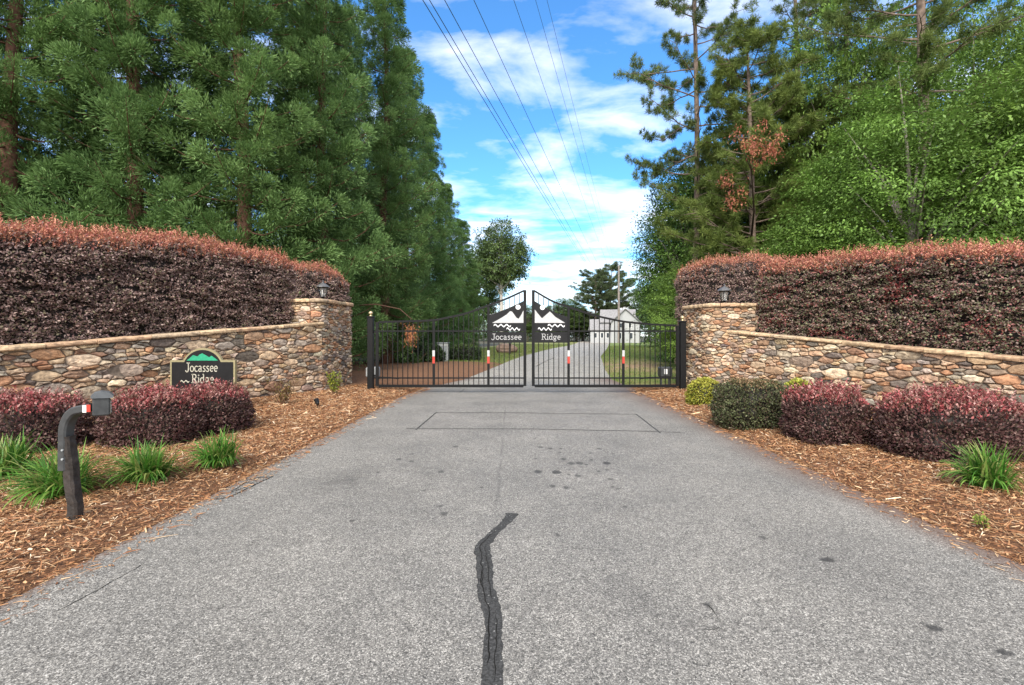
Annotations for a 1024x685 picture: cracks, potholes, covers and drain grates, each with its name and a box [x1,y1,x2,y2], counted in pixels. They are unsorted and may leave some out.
crack [220,461,291,499]
